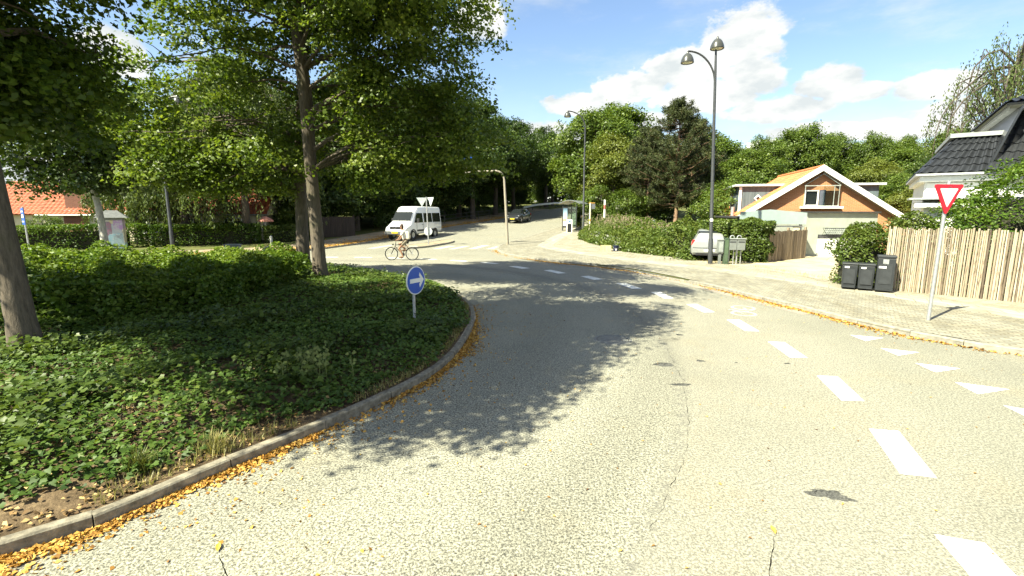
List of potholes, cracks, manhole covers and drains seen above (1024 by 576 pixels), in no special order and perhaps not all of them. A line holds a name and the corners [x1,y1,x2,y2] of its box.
crack [649,371,690,528]
pothole [803,489,858,502]
